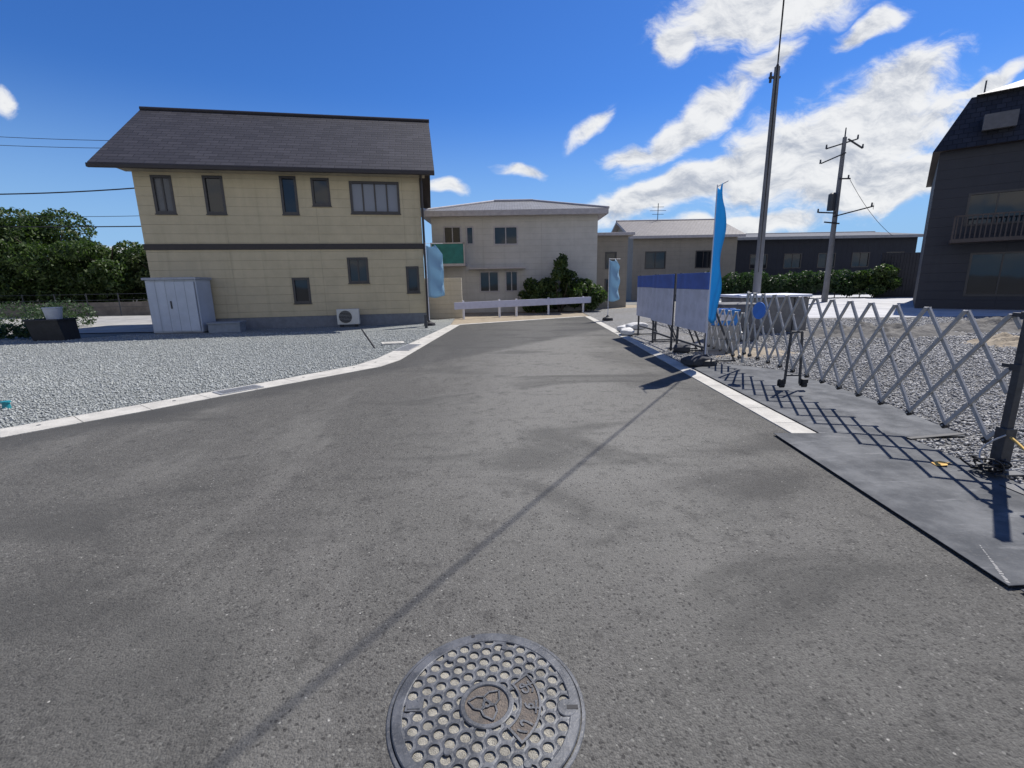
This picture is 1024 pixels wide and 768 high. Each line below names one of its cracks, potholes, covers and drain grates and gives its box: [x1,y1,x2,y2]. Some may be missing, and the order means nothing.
manhole cover [386,633,586,768]
drain grate [213,384,264,395]
